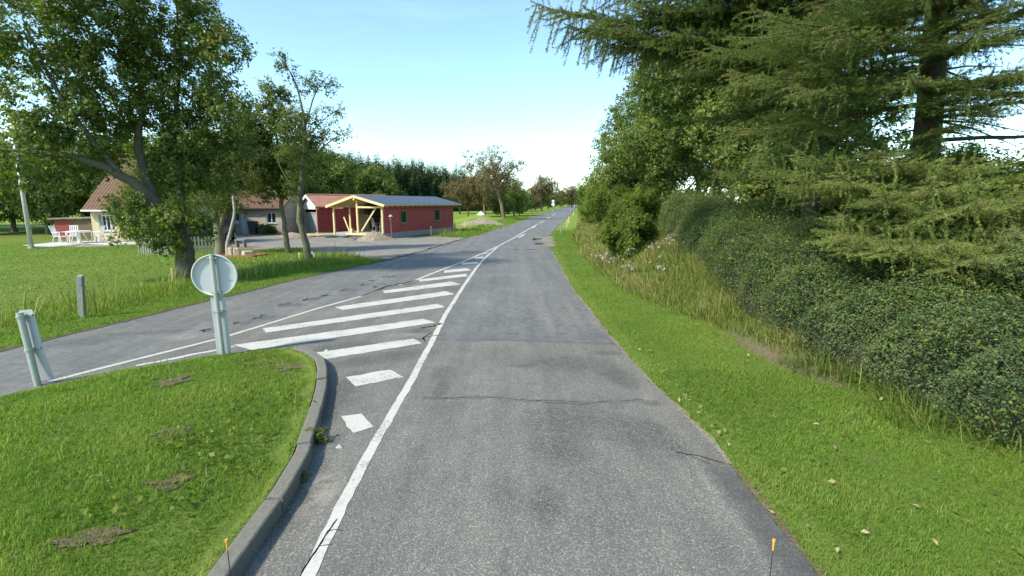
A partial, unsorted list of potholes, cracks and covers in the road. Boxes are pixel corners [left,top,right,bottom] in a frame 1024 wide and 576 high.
crack [675,451,725,464]
crack [300,520,342,576]
